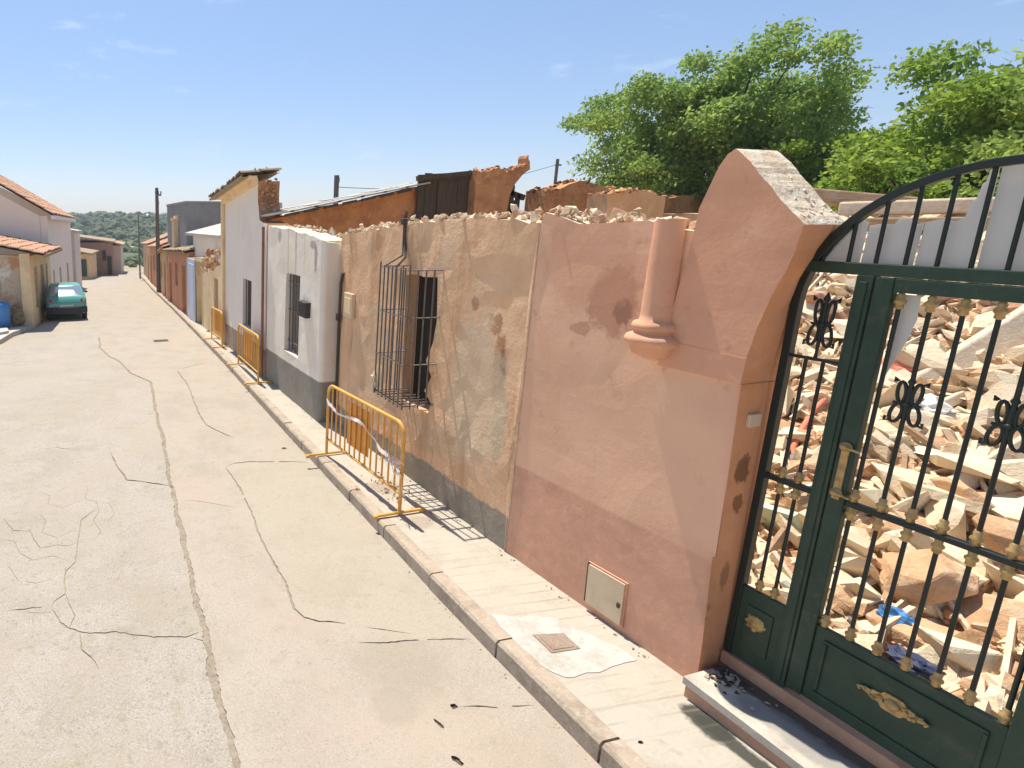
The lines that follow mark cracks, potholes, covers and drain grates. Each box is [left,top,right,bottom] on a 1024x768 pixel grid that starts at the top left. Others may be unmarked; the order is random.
crack [3,337,340,768]
manhole cover [533,633,580,653]
